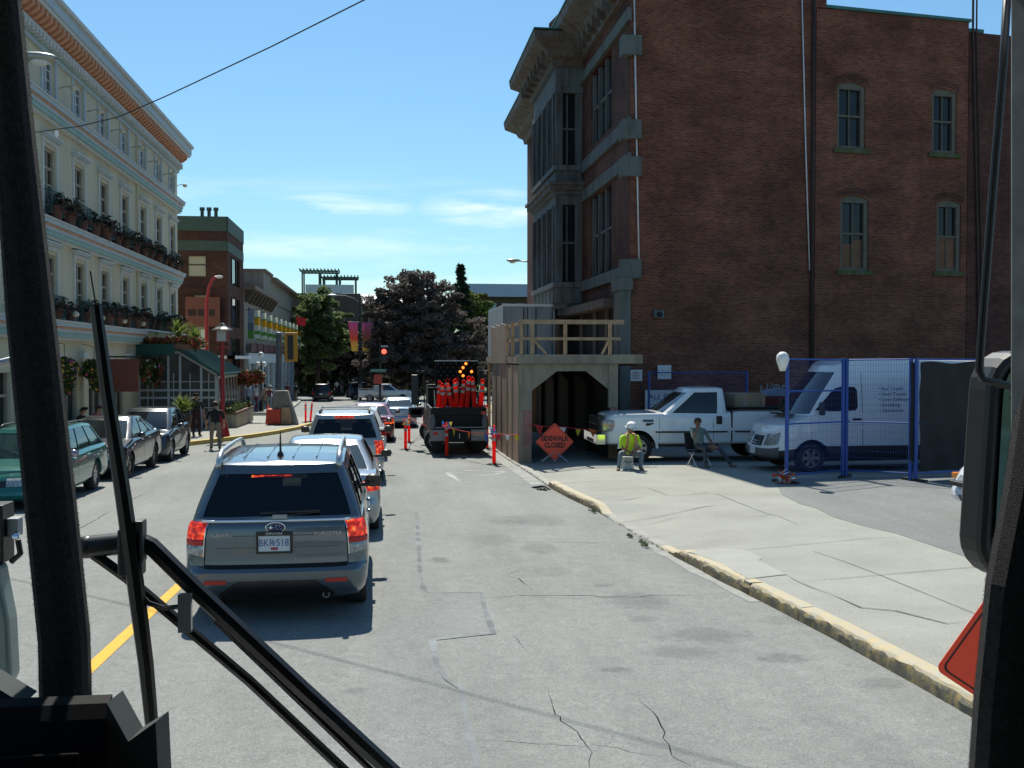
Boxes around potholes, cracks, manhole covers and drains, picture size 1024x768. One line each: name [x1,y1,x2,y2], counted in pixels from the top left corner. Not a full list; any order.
crack [509,567,651,599]
crack [507,686,692,768]
